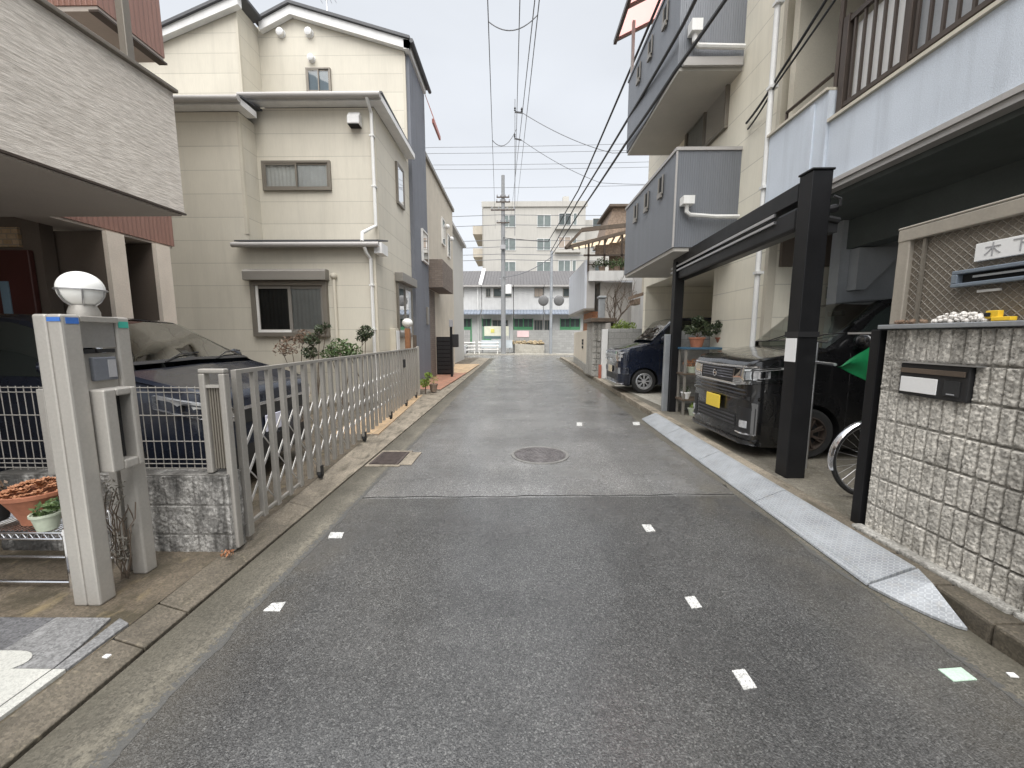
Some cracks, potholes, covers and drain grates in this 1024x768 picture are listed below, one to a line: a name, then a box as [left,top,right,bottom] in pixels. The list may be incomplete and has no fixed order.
manhole cover [511,446,569,464]
drain grate [365,450,422,467]
